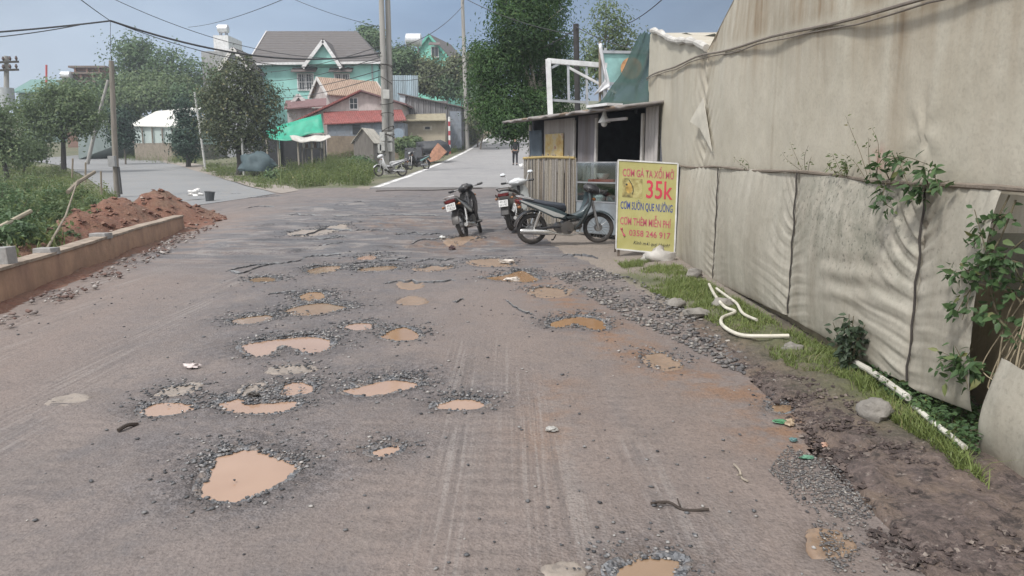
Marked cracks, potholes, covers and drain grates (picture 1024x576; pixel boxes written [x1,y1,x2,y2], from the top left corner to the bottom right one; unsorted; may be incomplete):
pothole [191,324,366,373]
pothole [397,296,429,305]
pothole [403,383,515,423]
pothole [204,307,312,329]
pothole [608,345,704,375]
pothole [126,371,243,414]
pothole [508,309,648,333]
pothole [311,314,412,338]
pothole [805,528,857,559]
pothole [509,279,596,300]
pothole [167,379,355,432]
